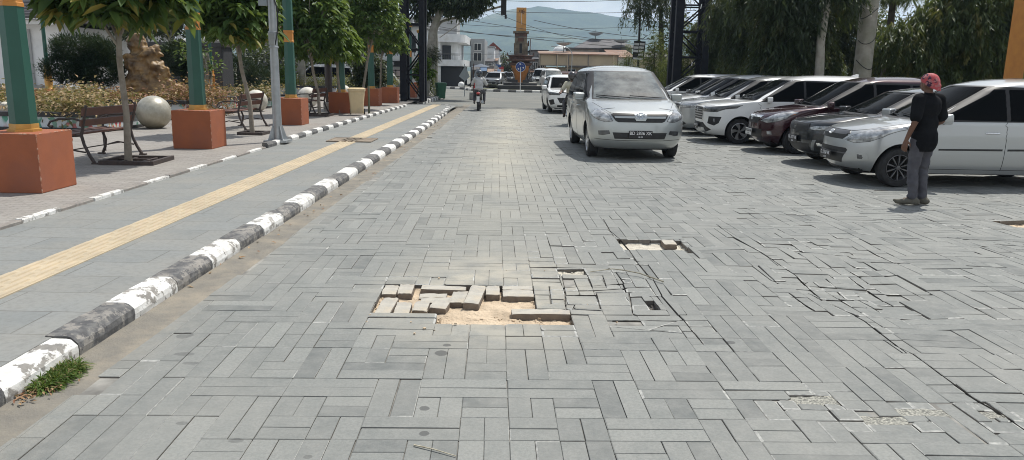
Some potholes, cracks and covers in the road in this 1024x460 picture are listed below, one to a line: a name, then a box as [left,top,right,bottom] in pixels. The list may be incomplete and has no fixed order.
pothole [365,270,618,334]
crack [719,226,1024,430]
pothole [619,243,688,253]
